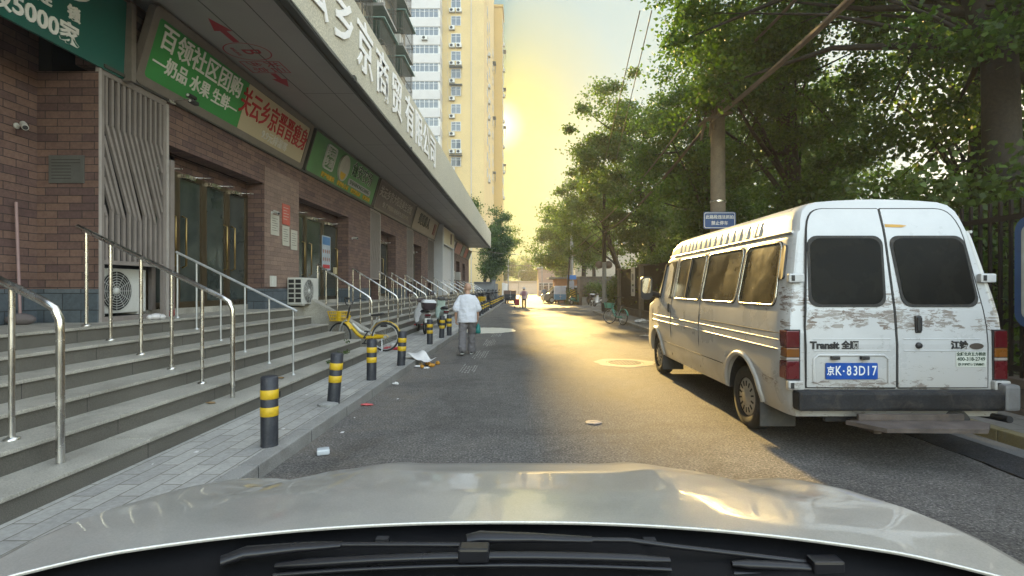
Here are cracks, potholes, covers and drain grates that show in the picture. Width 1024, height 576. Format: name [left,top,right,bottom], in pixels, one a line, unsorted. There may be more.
manhole cover [594,359,655,368]
